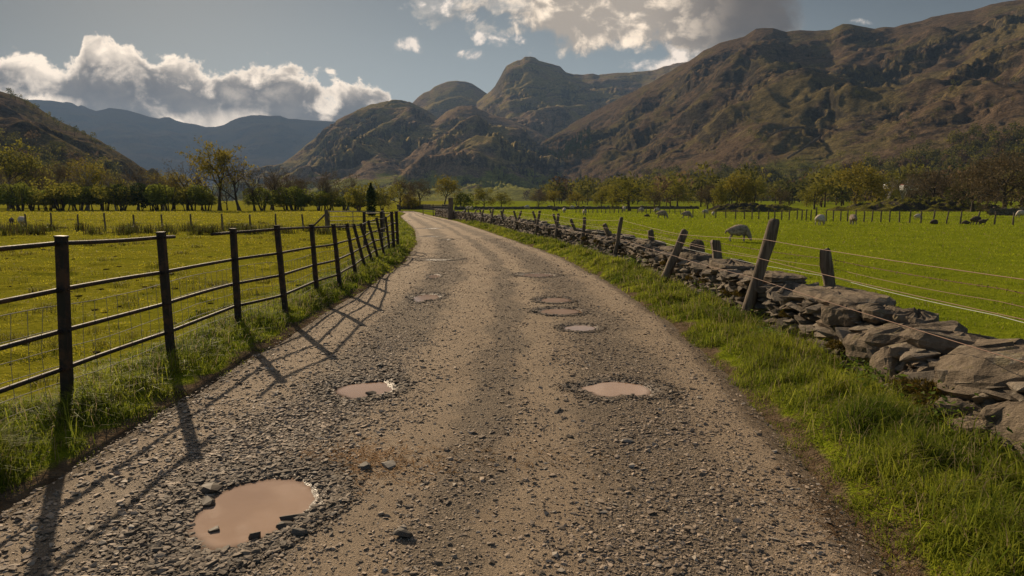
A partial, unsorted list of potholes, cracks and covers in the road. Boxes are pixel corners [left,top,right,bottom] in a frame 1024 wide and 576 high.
pothole [555,323,605,333]
pothole [407,292,447,304]
pothole [319,376,410,404]
pothole [148,461,352,576]
pothole [560,377,672,402]
pothole [532,296,577,304]
pothole [528,306,590,317]
